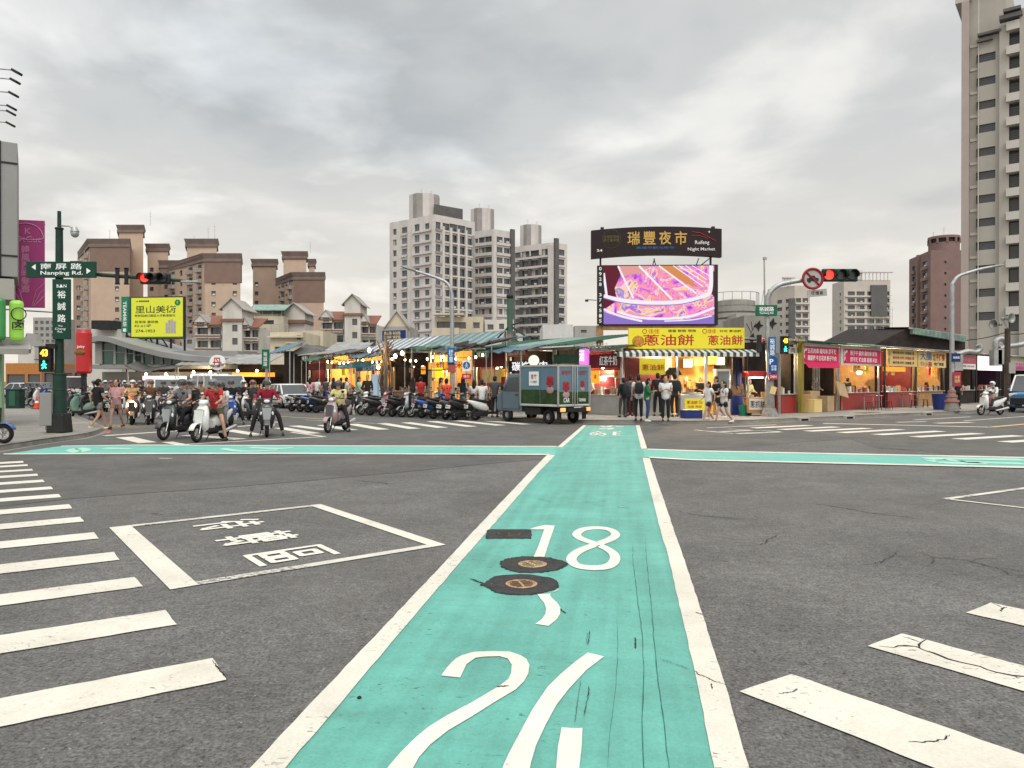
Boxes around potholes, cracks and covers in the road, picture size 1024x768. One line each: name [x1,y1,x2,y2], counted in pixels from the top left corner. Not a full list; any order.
crack [883,638,1024,678]
manhole cover [480,574,559,595]
crack [608,543,723,768]
manhole cover [500,556,568,573]
manhole cover [485,529,532,539]
